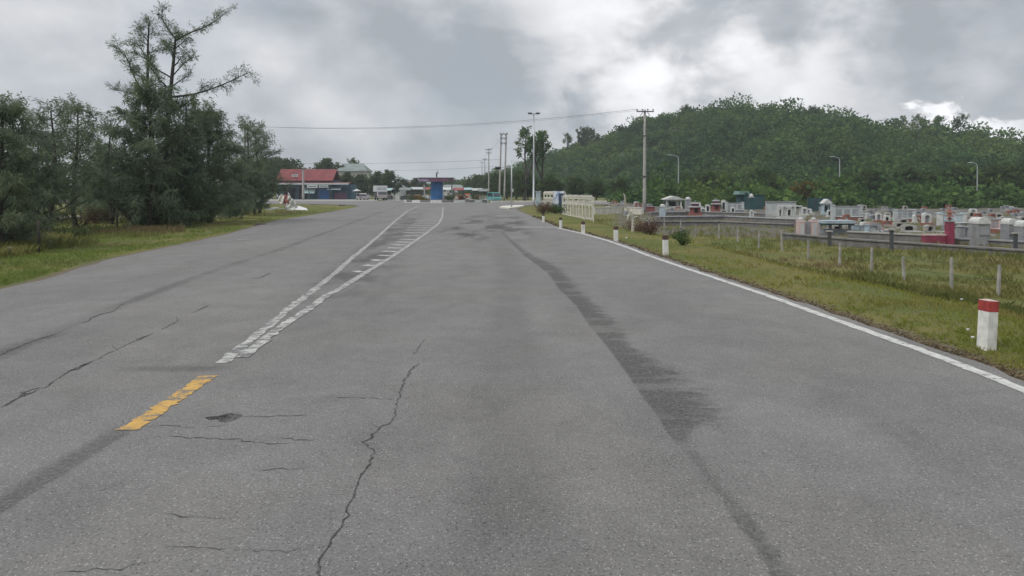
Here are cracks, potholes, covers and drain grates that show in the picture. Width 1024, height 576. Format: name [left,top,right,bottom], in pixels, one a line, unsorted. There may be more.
crack [142,413,314,444]
pothole [205,413,242,423]
crack [1,304,122,355]
crack [172,341,424,576]
